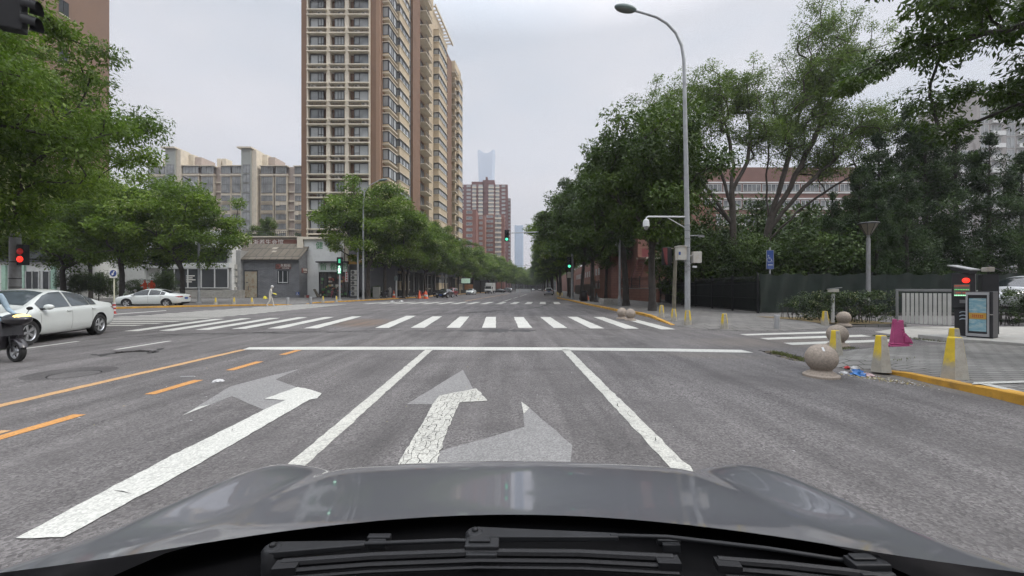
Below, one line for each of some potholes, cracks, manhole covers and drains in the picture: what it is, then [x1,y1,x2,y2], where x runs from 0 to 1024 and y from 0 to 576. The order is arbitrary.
manhole cover [18,366,119,380]
